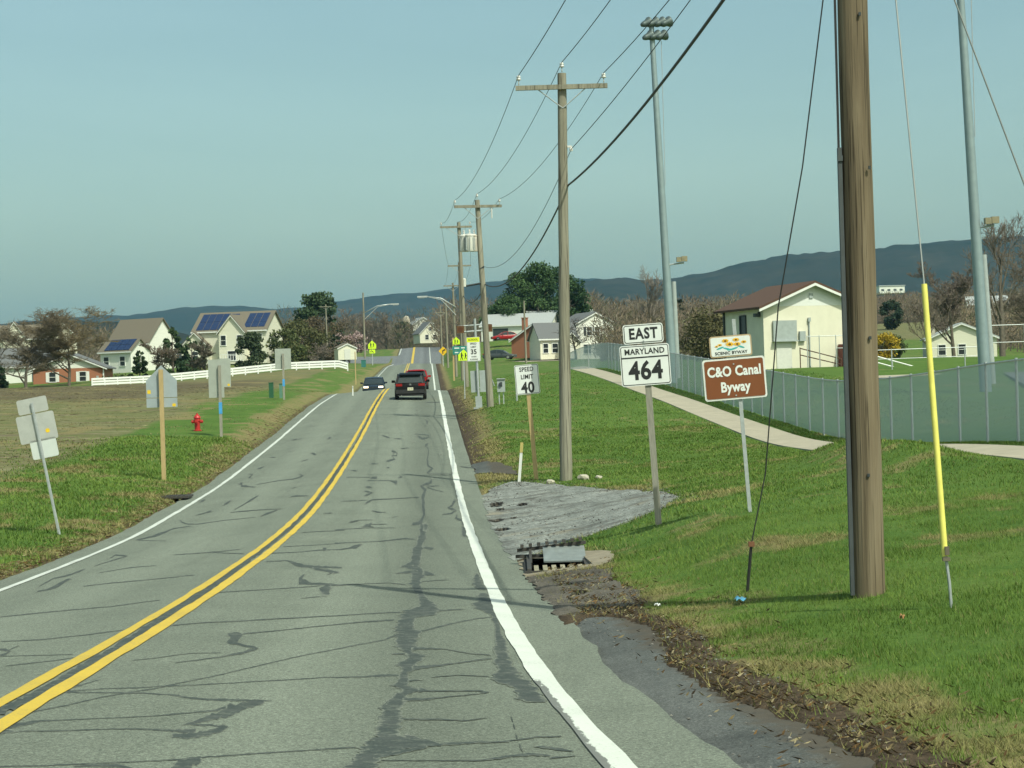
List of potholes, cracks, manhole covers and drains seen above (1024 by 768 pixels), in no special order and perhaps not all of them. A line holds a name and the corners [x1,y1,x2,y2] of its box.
crack [32,495,562,768]
drain grate [516,537,589,574]
